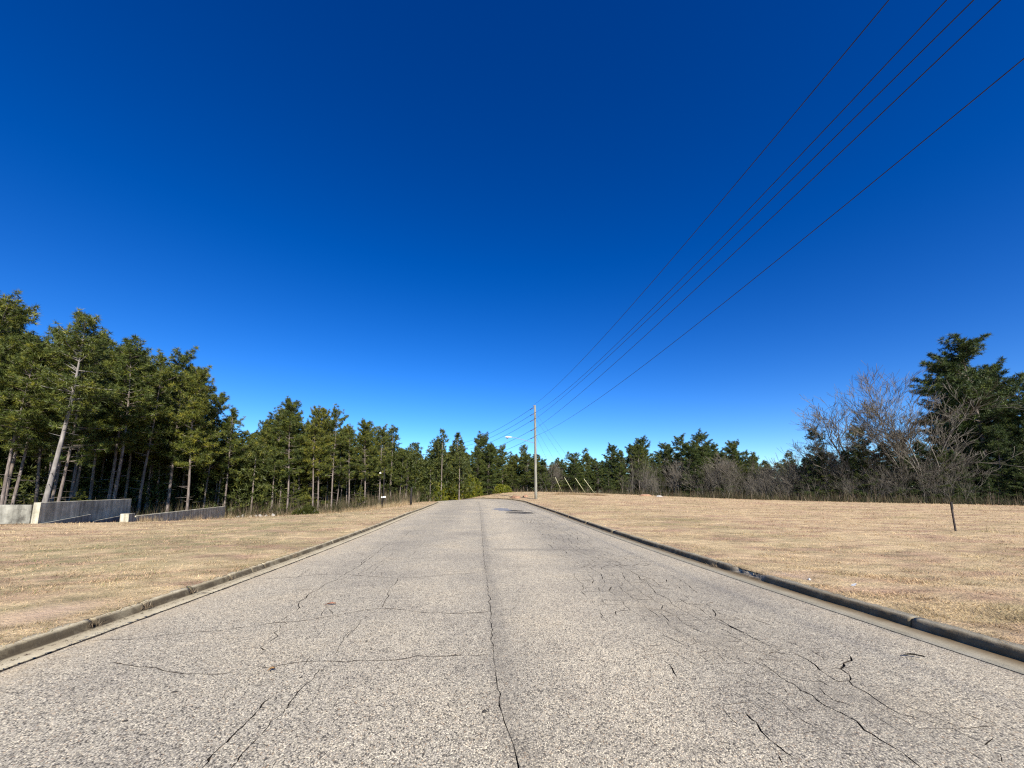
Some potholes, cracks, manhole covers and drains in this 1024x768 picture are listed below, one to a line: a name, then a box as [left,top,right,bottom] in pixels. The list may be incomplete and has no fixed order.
crack [107,537,488,768]
crack [523,517,1003,768]
